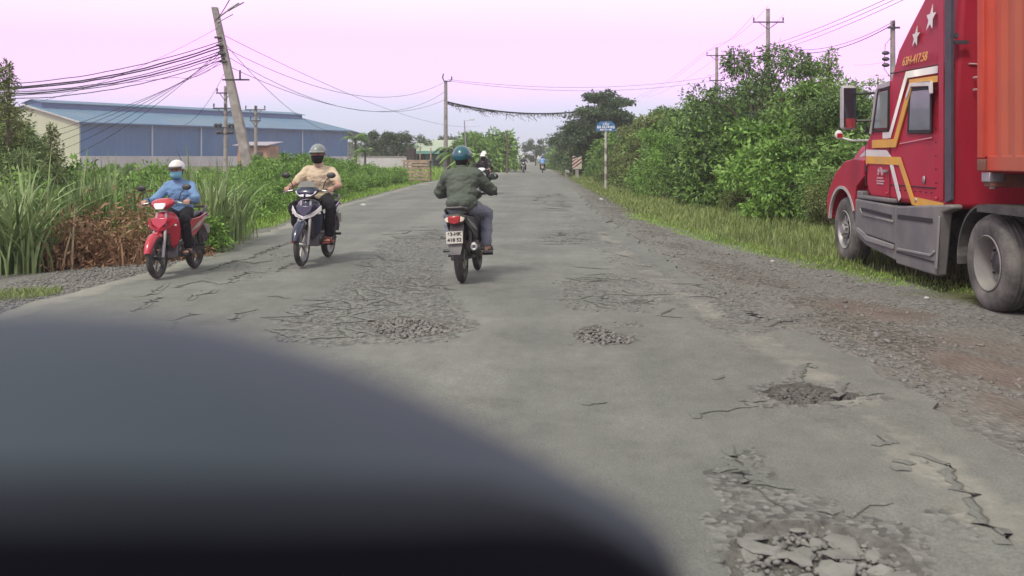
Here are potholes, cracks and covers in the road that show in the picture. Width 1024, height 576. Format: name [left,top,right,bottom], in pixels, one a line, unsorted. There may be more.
pothole [573,324,640,345]
pothole [365,315,470,340]
crack [816,434,1013,545]
pothole [760,383,862,405]
crack [542,232,722,318]
crack [689,398,767,419]
pothole [719,520,924,576]
crack [129,241,455,339]
